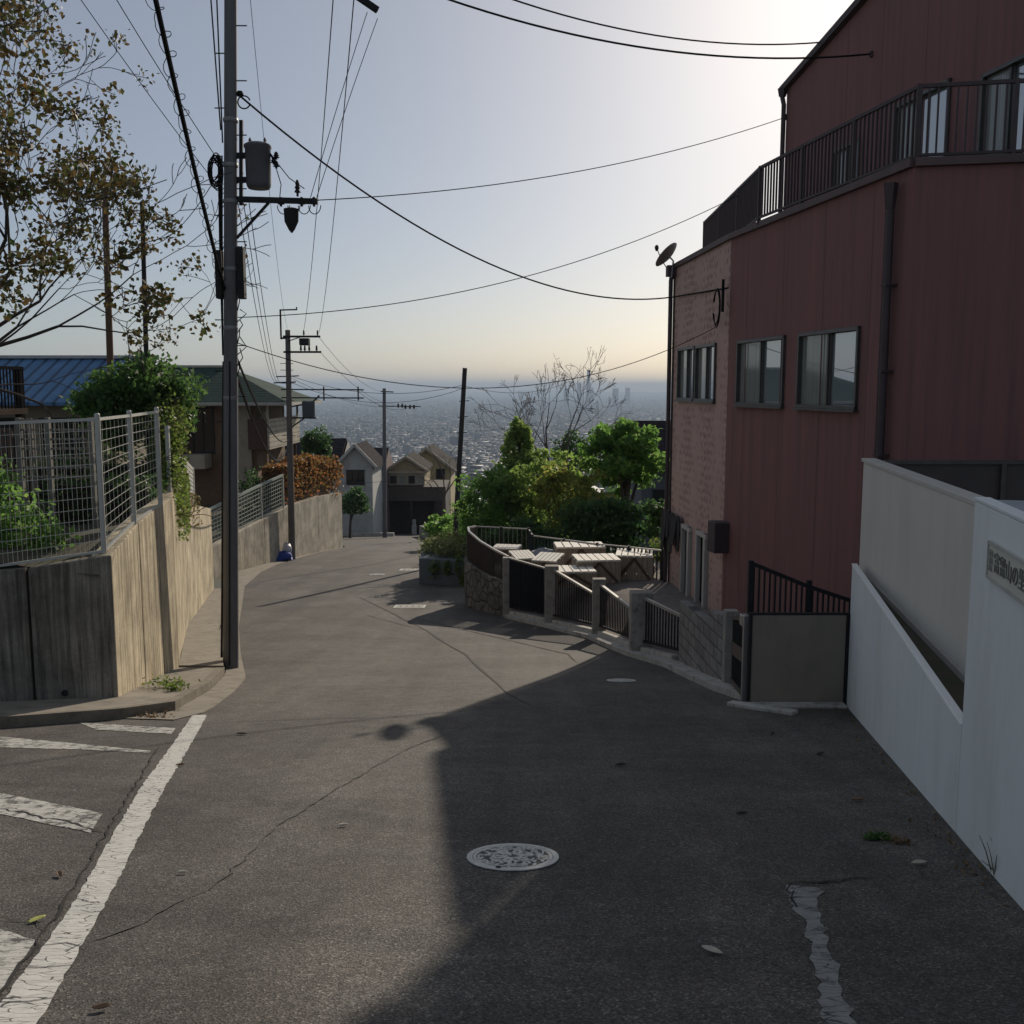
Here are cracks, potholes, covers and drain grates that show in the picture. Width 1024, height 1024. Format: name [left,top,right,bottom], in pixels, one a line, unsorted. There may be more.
crack [786,877,878,907]
crack [360,597,578,706]
crack [0,724,471,1002]
manhole cover [467,843,559,871]
